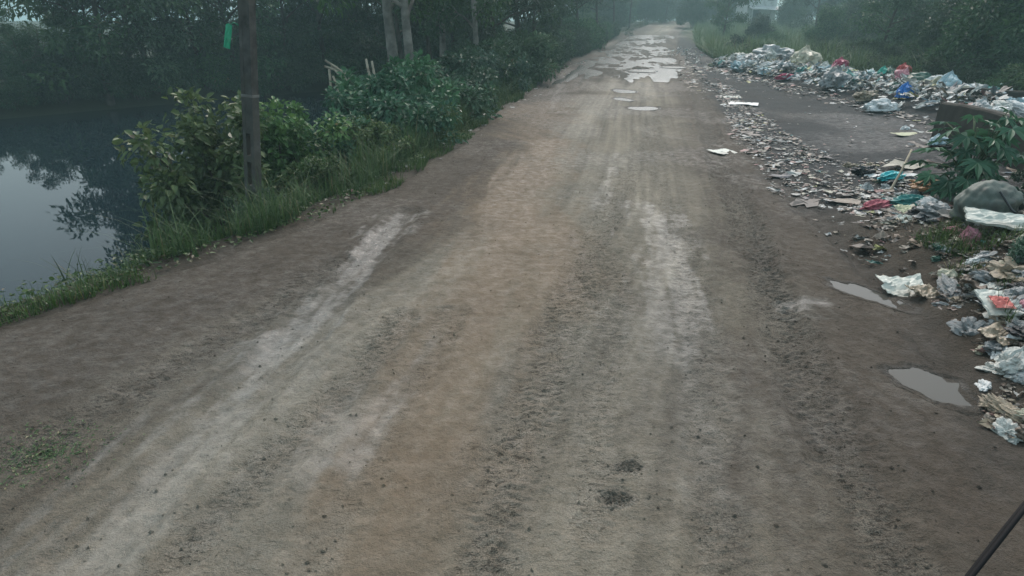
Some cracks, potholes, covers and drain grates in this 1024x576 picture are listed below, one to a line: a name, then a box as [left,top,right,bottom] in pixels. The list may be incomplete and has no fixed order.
pothole [816,275,928,317]
pothole [876,361,991,416]
